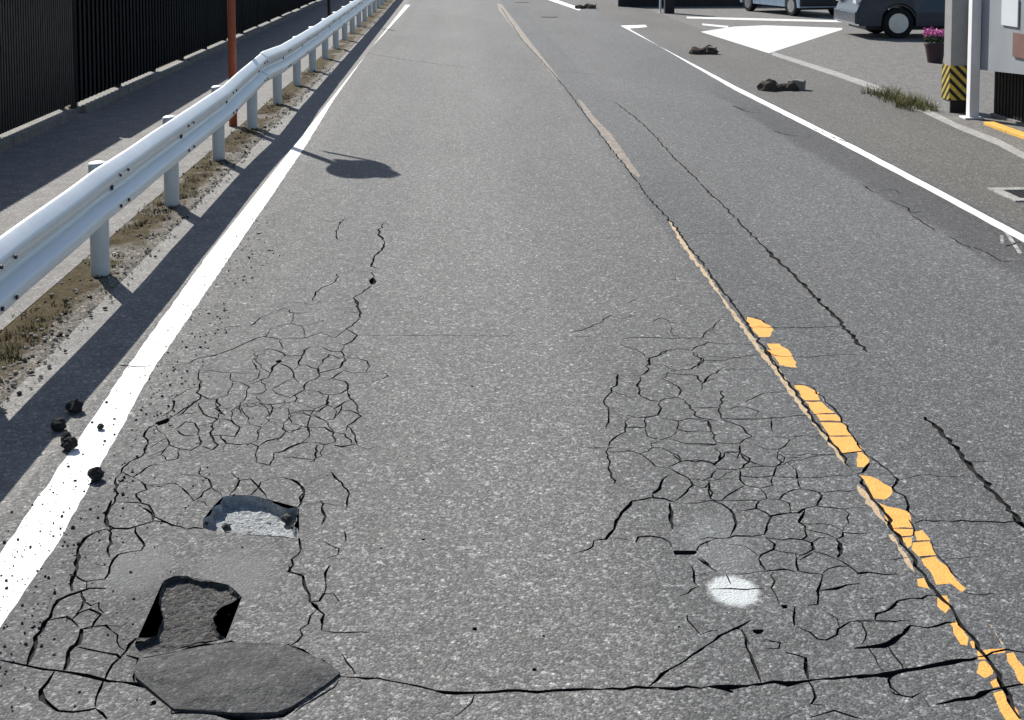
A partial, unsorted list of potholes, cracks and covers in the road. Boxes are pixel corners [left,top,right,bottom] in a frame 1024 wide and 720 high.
crack [0,659,140,687]
crack [551,71,1021,719]
drain grate [987,187,1024,202]
crack [312,222,398,345]
crack [26,301,389,719]
crack [339,620,1024,719]
pothole [135,577,242,653]
pothole [203,495,299,538]
